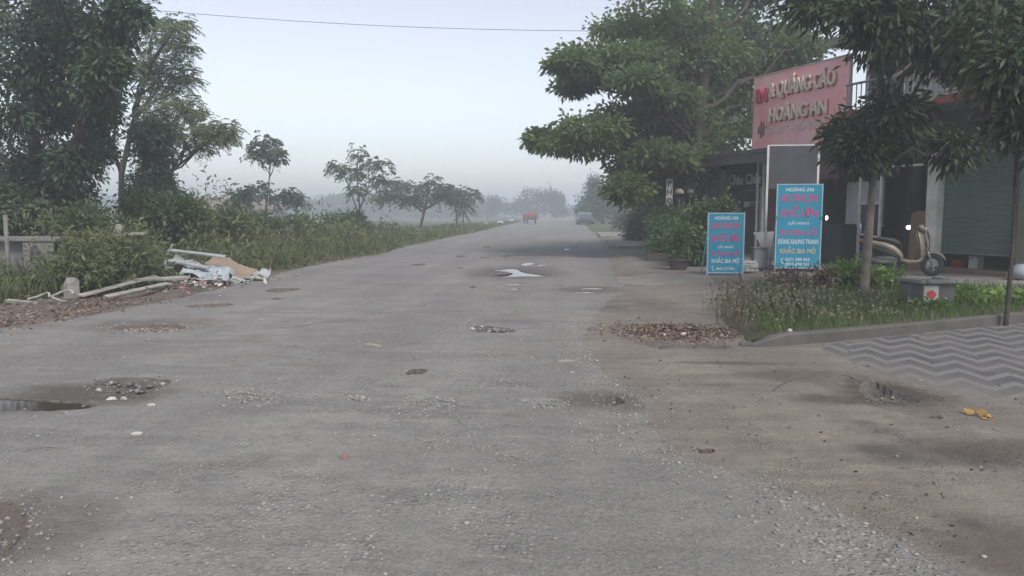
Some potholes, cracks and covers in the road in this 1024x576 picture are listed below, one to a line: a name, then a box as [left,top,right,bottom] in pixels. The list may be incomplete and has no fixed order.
pothole [0,397,97,411]
pothole [95,322,204,335]
pothole [463,324,519,334]
pothole [79,373,179,404]
pothole [592,395,625,407]
pothole [855,378,940,406]
pothole [486,267,547,277]
